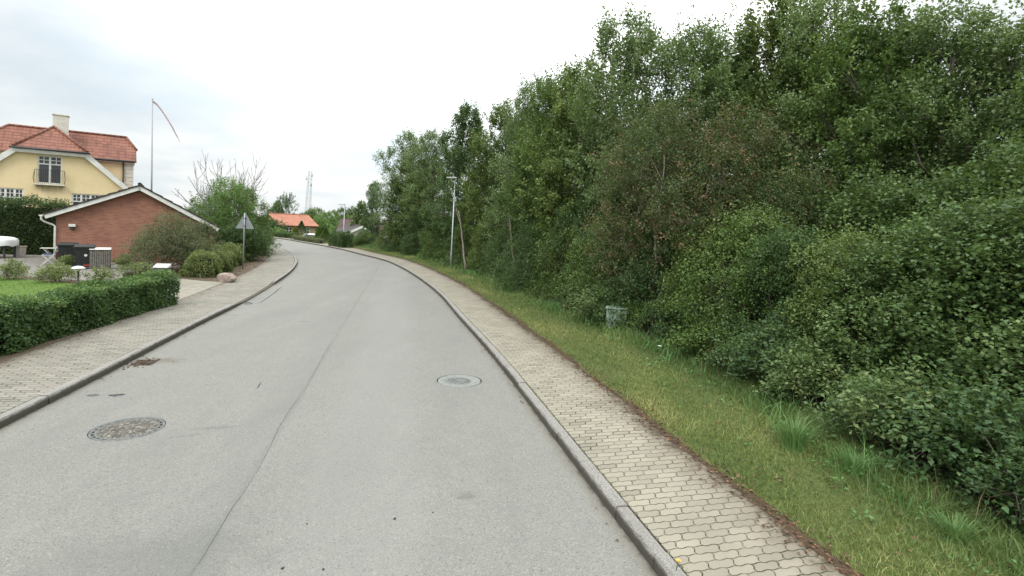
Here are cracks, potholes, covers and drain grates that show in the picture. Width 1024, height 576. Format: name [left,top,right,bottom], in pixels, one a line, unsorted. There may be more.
manhole cover [87,417,166,442]
manhole cover [437,375,482,388]
crack [191,348,328,574]
